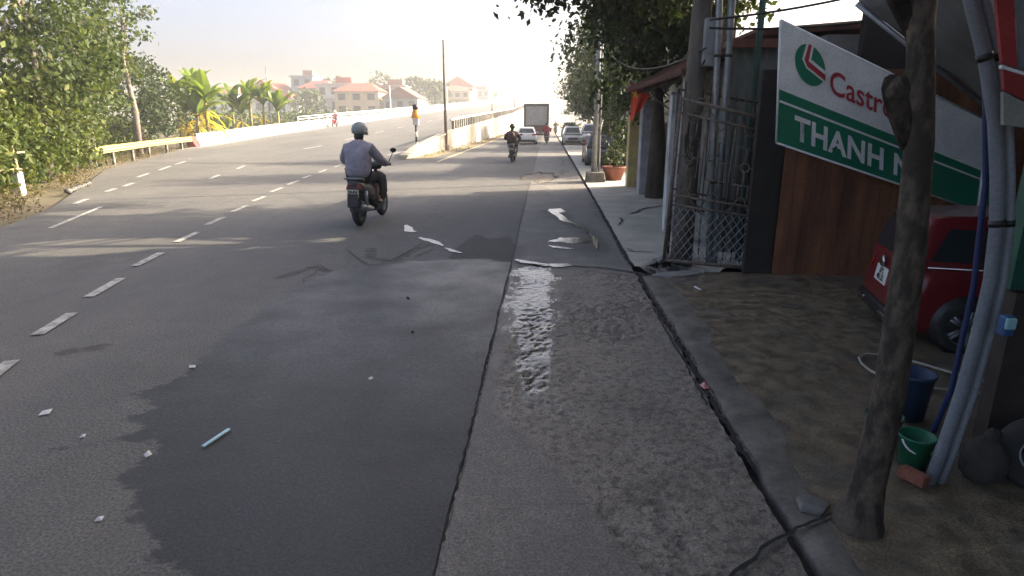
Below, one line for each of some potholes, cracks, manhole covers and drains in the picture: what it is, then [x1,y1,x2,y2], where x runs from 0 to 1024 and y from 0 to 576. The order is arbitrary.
crack [523,263,759,470]
crack [618,206,660,225]
